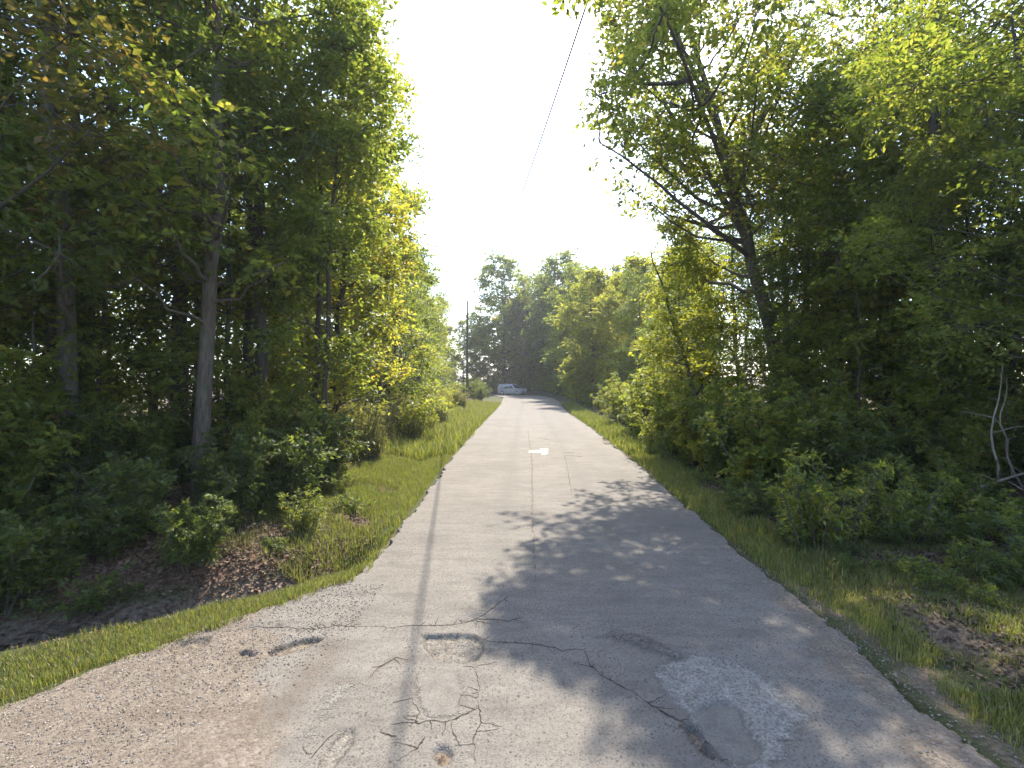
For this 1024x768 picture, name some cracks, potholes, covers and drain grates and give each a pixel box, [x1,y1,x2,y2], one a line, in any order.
pothole [692,697,765,766]
pothole [433,747,451,767]
pothole [319,726,355,768]
pothole [268,637,323,656]
pothole [423,633,486,664]
crack [235,596,687,733]
crack [381,662,501,765]
